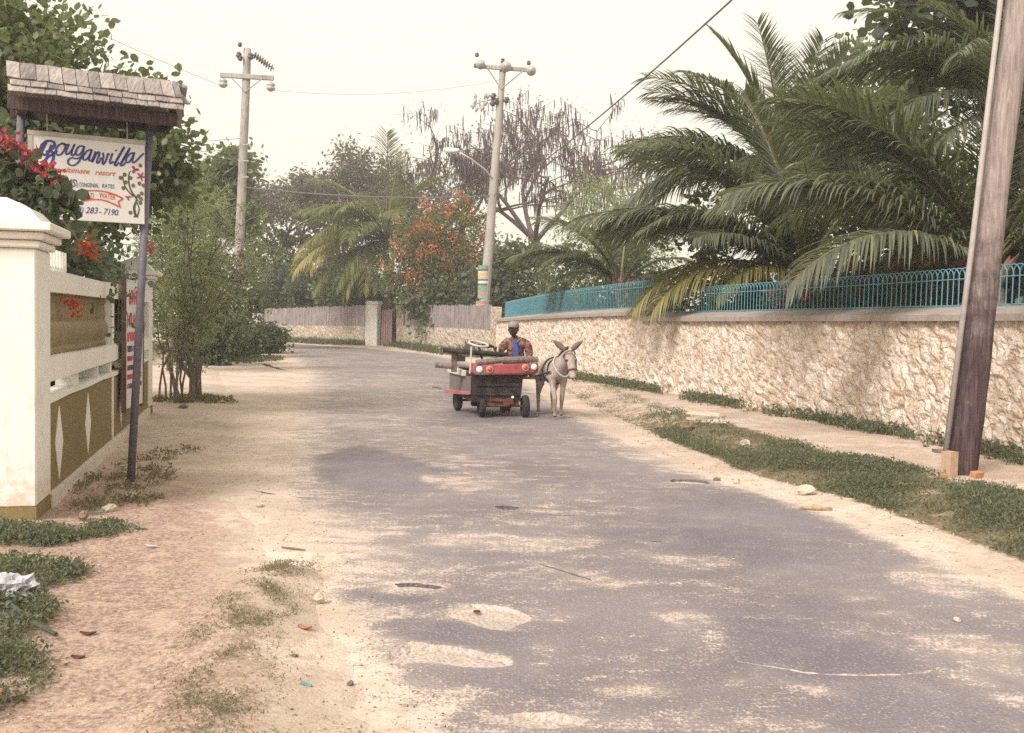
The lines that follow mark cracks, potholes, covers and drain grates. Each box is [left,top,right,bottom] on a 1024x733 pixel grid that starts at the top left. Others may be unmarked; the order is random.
crack [744,662,947,676]
crack [540,563,592,581]
